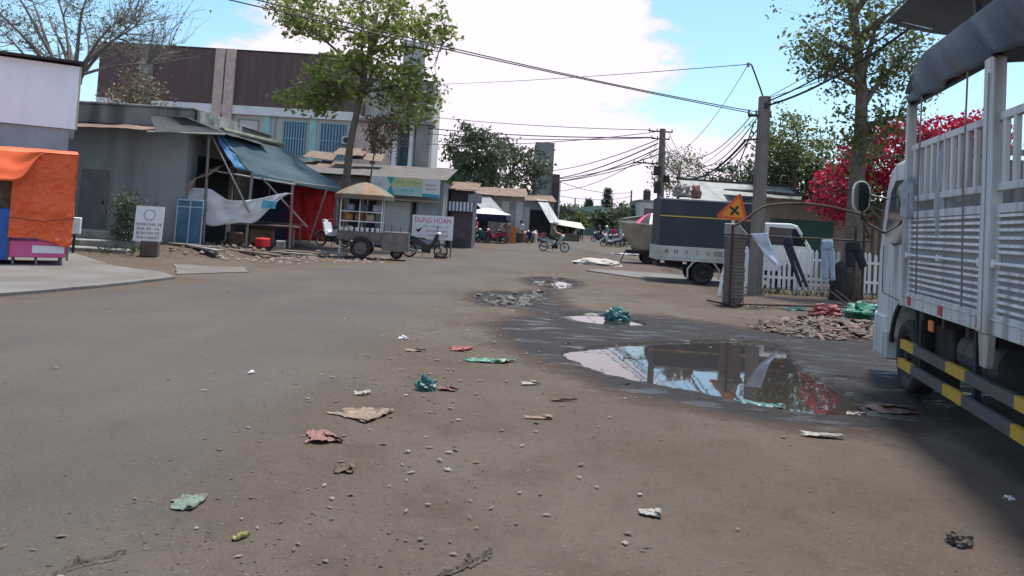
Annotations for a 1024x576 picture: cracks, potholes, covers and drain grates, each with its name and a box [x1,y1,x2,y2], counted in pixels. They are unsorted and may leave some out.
pothole [537,336,910,426]
pothole [461,288,567,309]
pothole [517,276,591,290]
crack [52,550,126,576]
pothole [539,310,668,329]
crack [436,547,493,576]
